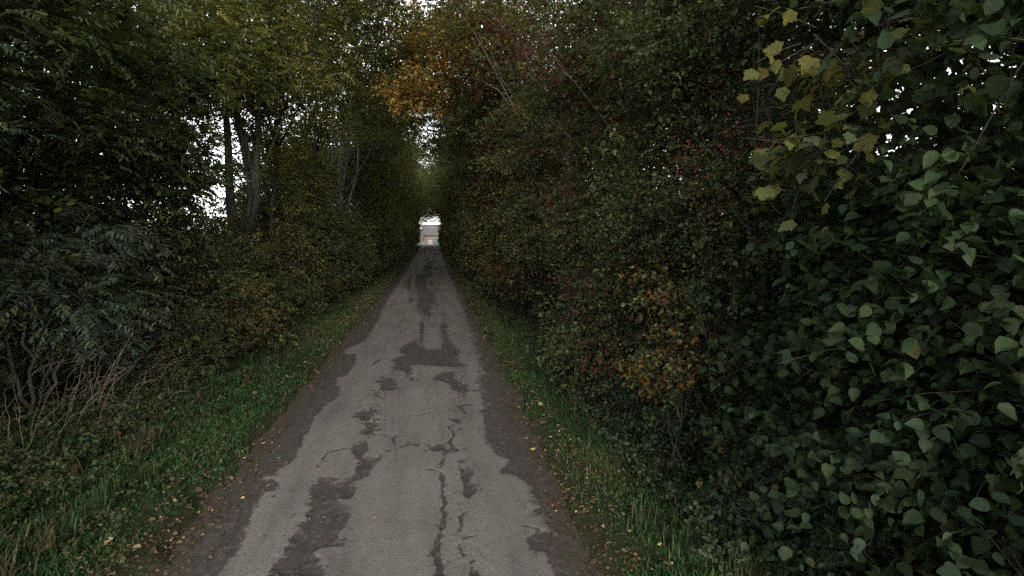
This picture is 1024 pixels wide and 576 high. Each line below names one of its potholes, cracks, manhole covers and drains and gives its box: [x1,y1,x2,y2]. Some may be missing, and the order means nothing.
crack [320,447,351,460]
crack [378,403,478,576]
